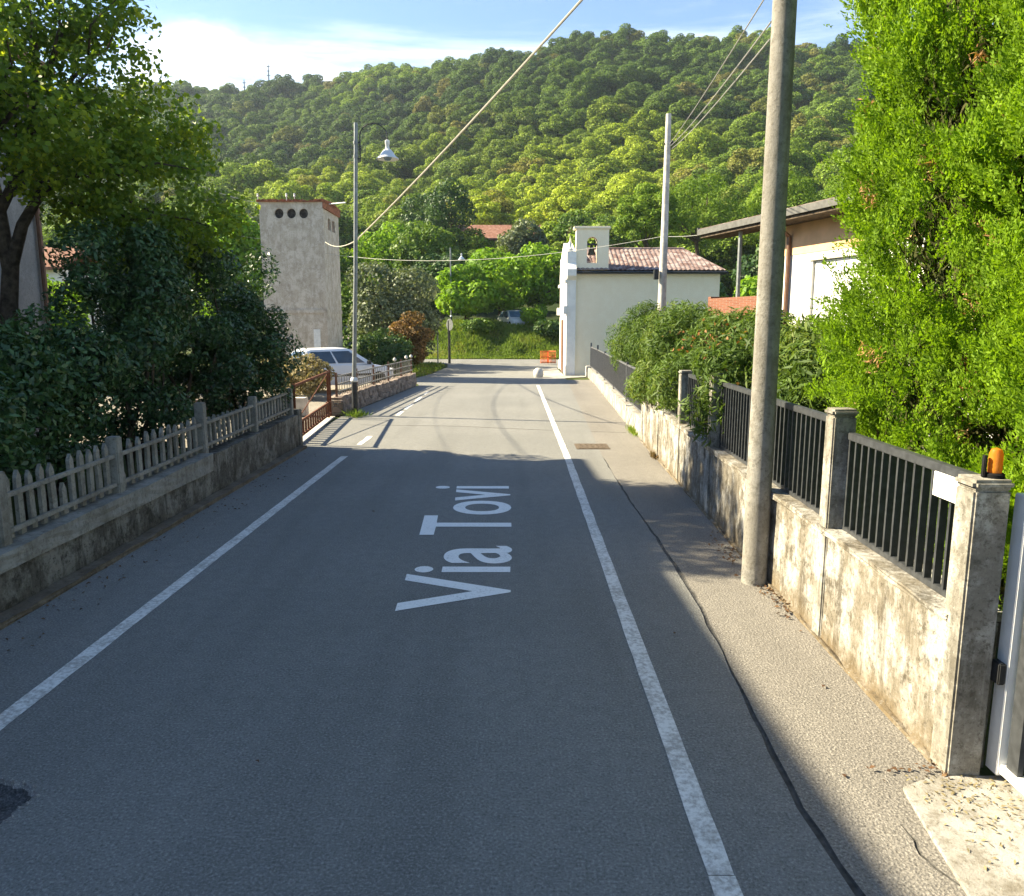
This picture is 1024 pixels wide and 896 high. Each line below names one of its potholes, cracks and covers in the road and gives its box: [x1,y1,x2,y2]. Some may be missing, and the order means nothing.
crack [901,824,960,886]
